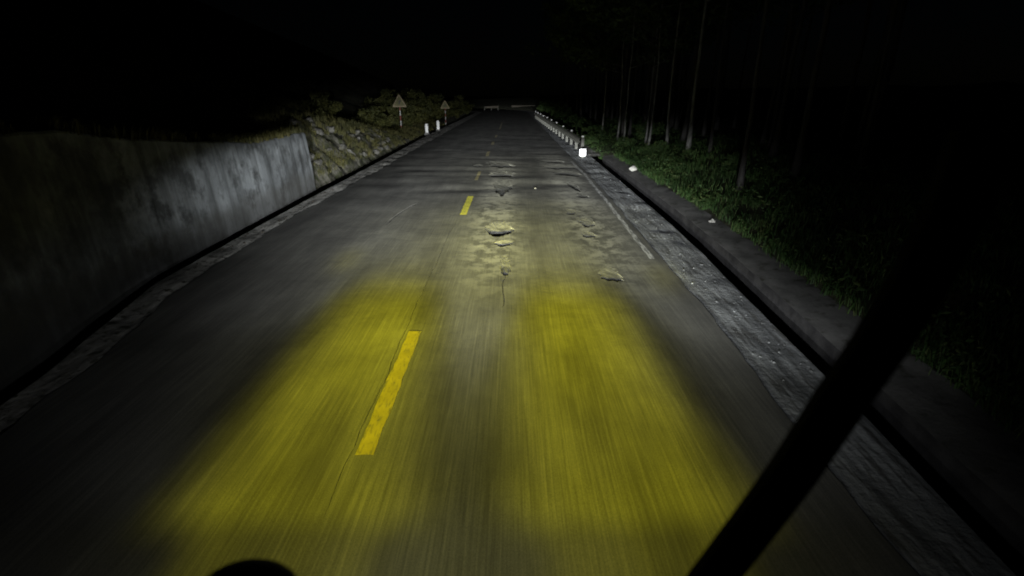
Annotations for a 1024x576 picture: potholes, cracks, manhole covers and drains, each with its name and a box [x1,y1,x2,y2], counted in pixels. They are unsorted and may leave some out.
pothole [500,255,511,276]
pothole [576,217,595,228]
pothole [598,266,624,282]
pothole [493,178,513,196]
